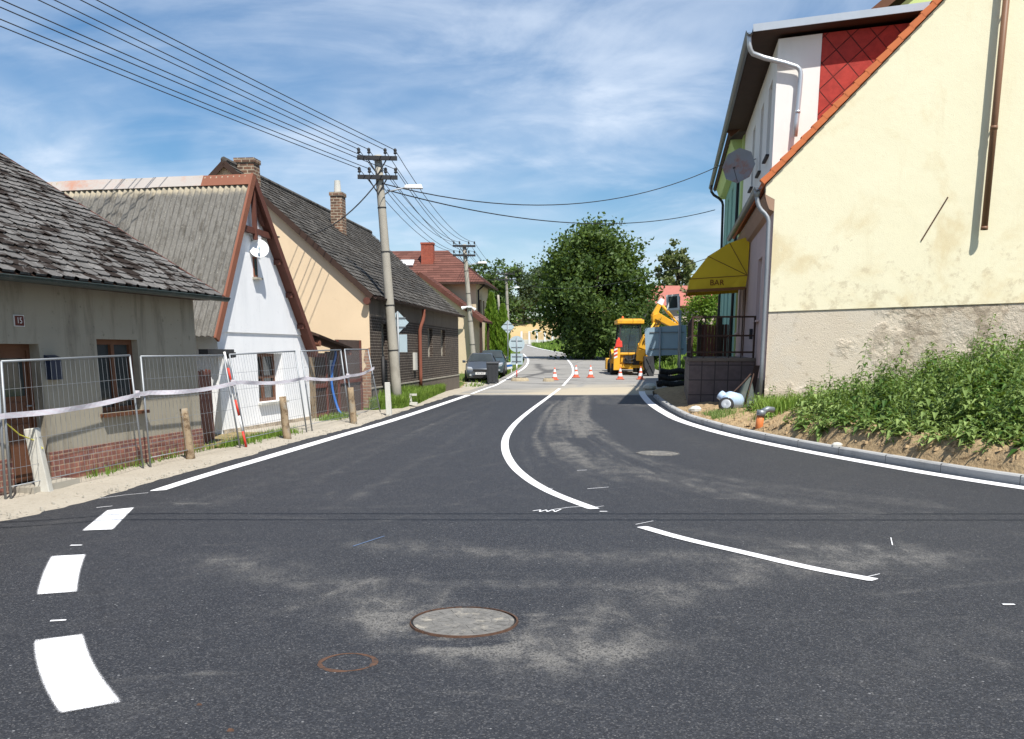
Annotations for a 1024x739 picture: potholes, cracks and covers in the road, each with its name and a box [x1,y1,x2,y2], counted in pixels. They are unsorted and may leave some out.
manhole cover [409,606,519,638]
utility cover [317,653,379,672]
